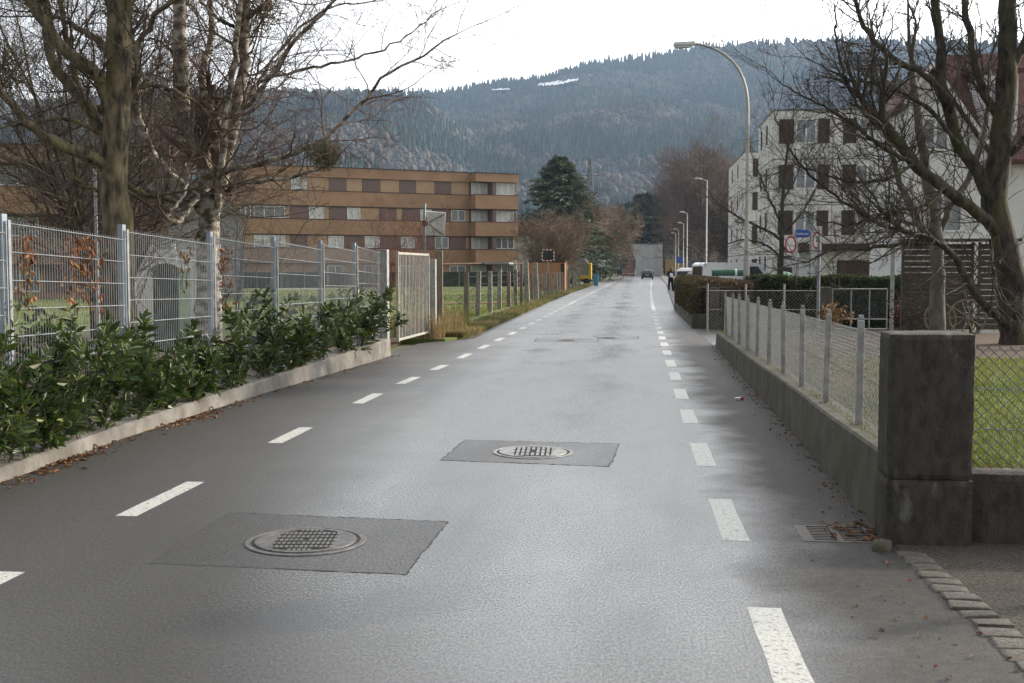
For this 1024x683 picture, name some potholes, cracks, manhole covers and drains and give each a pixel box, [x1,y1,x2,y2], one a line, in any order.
drain grate [793,525,875,543]
manhole cover [493,445,574,459]
manhole cover [244,527,366,556]
